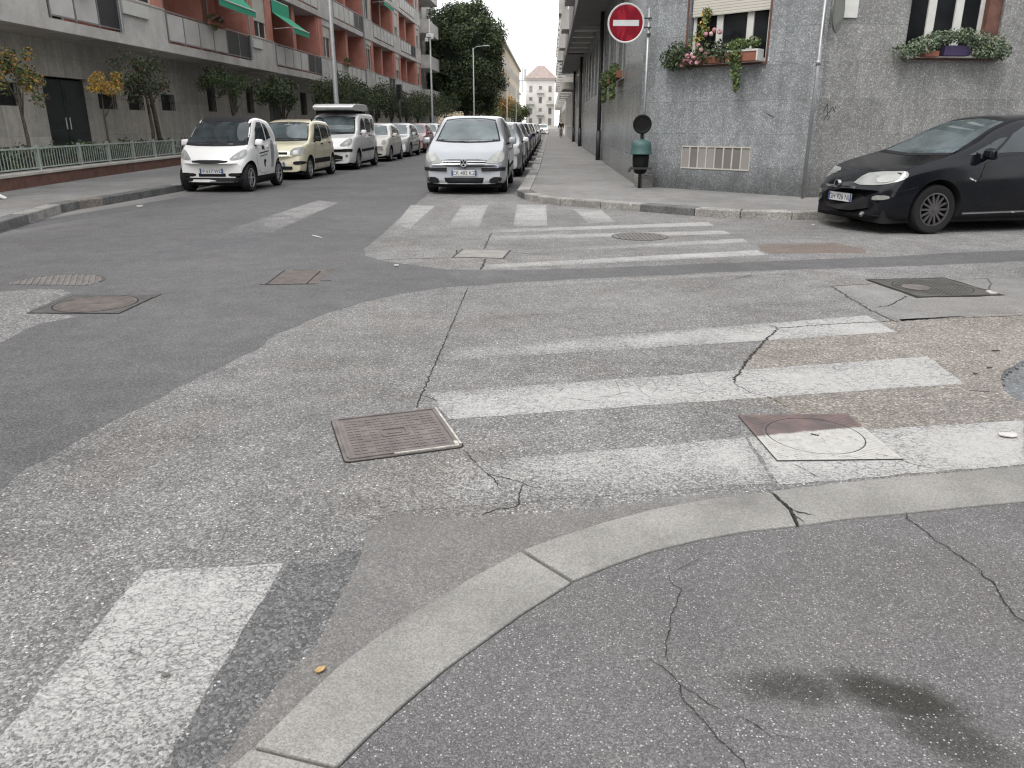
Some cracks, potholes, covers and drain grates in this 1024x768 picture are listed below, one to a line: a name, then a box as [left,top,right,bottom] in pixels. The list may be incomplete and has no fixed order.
crack [464,450,545,514]
manhole cover [738,413,903,461]
manhole cover [865,278,1003,298]
manhole cover [331,407,464,463]
manhole cover [28,293,160,313]
manhole cover [453,249,511,258]
crack [624,558,808,768]
crack [733,278,1020,408]
crack [906,512,1024,621]
manhole cover [259,269,335,285]
